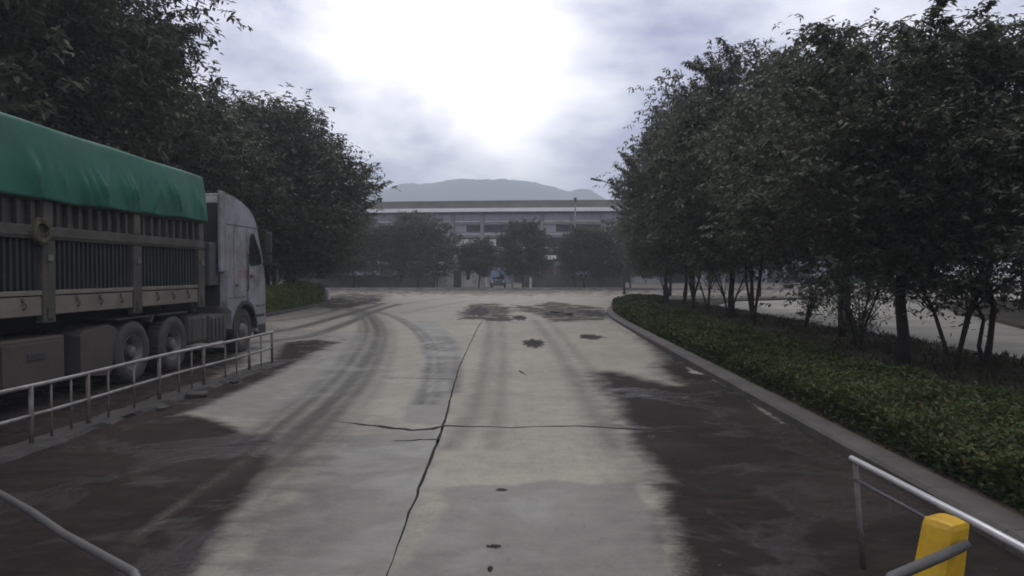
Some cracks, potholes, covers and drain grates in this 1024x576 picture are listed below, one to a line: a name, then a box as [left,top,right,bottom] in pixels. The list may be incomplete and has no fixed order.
pothole [522,339,546,349]
crack [336,304,722,576]
